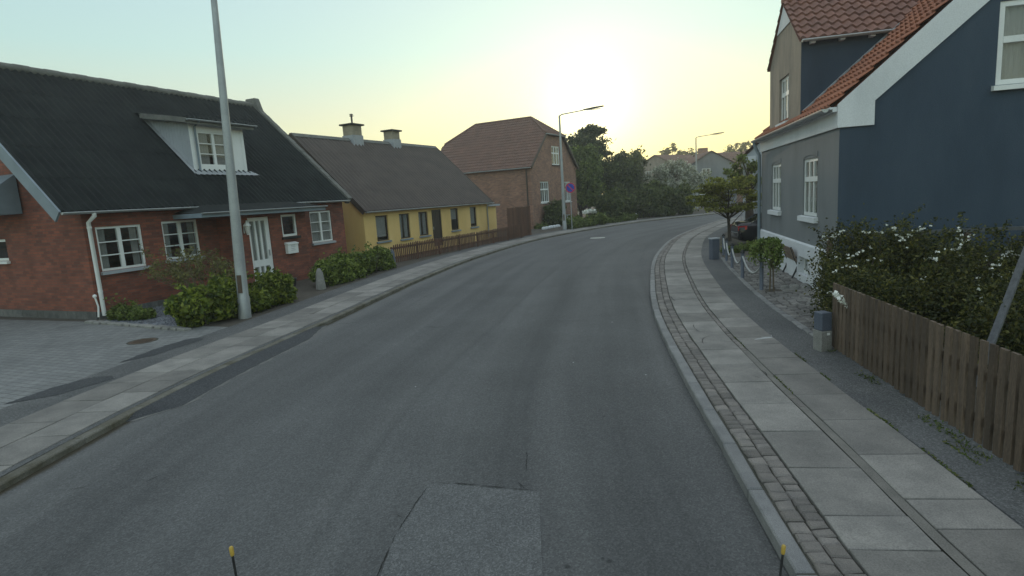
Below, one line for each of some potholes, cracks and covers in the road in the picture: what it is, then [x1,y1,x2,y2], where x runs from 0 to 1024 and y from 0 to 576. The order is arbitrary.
crack [377,488,427,576]
